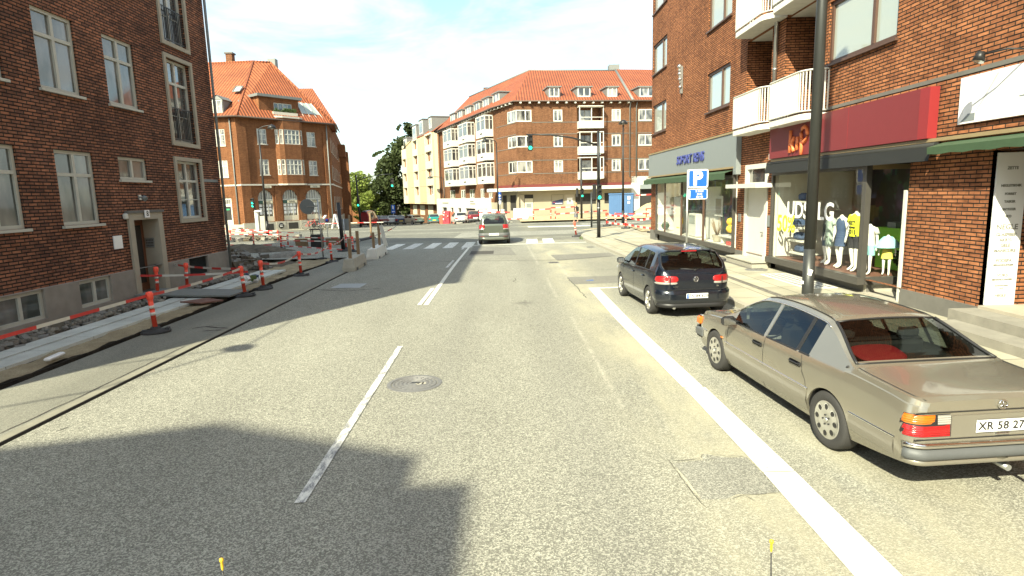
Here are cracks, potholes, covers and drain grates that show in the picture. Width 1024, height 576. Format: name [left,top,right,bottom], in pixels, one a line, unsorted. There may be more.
manhole cover [387,375,442,393]
